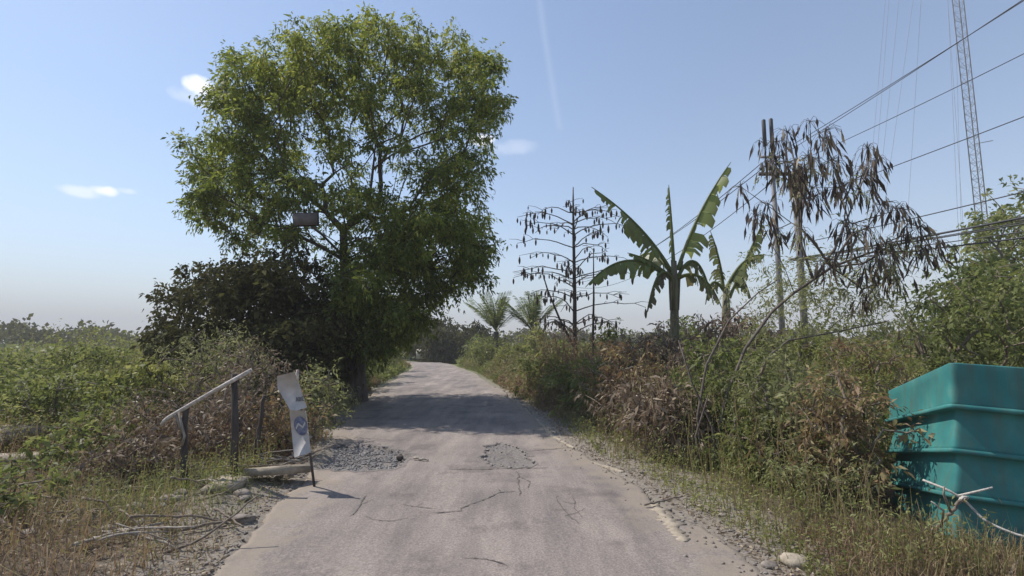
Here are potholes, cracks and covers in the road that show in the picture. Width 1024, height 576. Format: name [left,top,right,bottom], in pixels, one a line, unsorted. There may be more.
pothole [478,442,538,469]
crack [352,468,530,521]
pothole [295,444,416,473]
